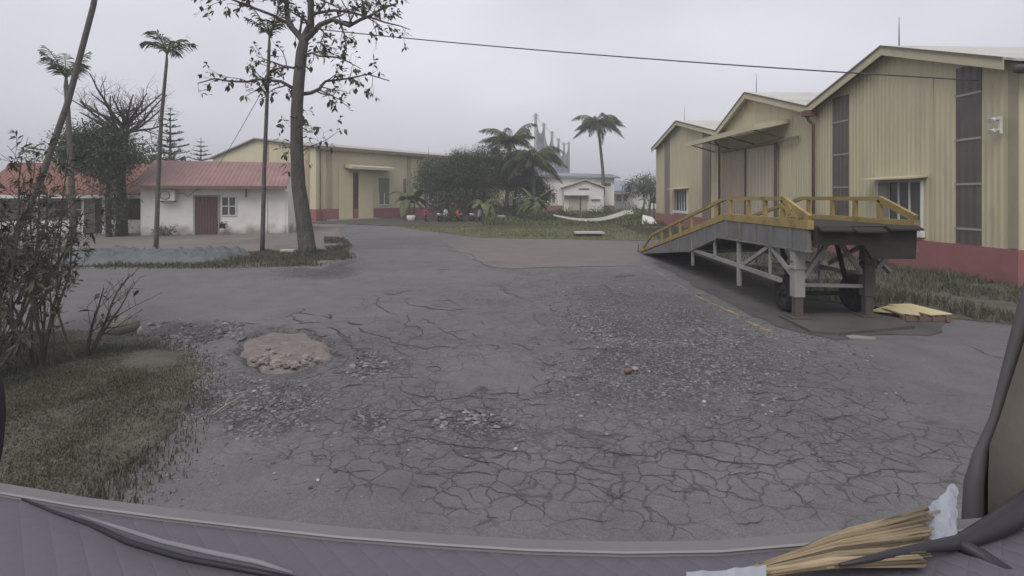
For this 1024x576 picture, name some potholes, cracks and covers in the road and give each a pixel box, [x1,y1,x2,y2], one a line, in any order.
crack [286,282,950,529]
pothole [430,407,530,441]
pothole [341,347,410,382]
